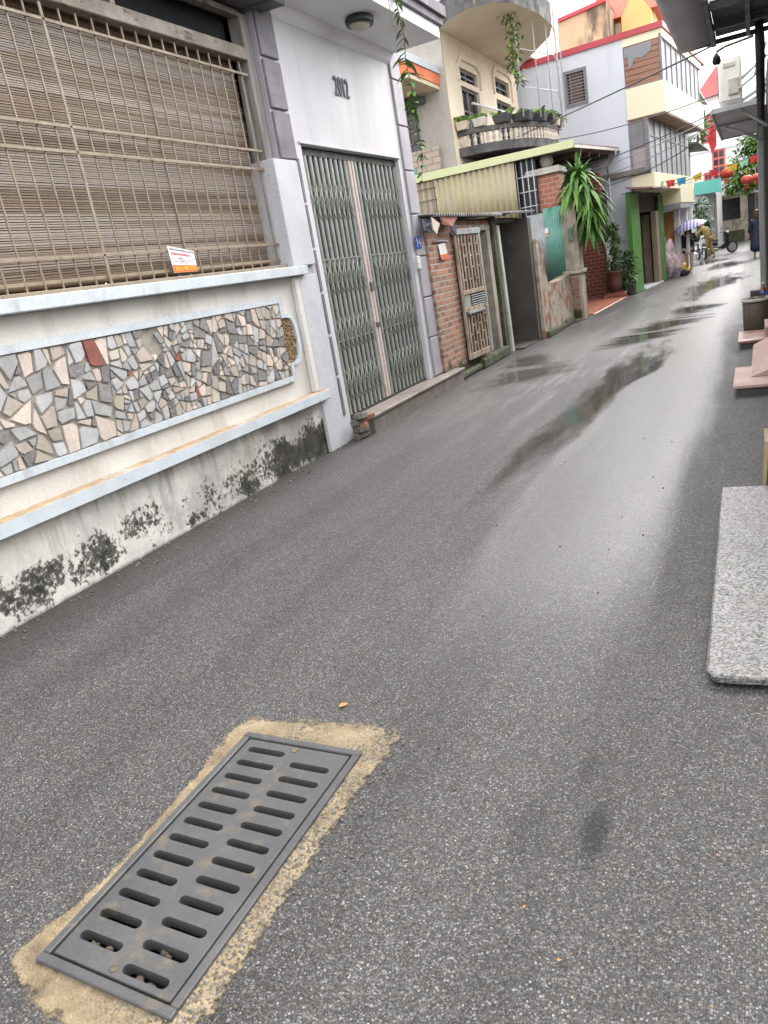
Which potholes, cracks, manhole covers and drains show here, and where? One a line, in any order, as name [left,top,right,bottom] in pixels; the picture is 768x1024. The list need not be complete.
drain grate [36,732,362,1022]
